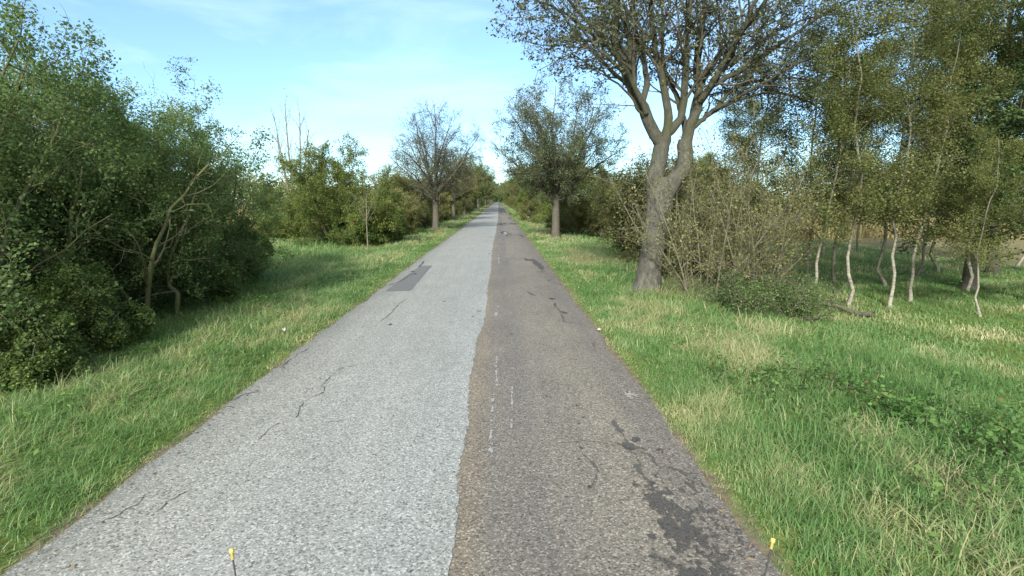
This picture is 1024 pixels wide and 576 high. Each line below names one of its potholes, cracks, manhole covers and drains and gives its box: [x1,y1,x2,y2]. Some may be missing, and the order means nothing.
crack [258,366,349,440]
crack [101,489,190,523]
crack [563,417,697,491]
